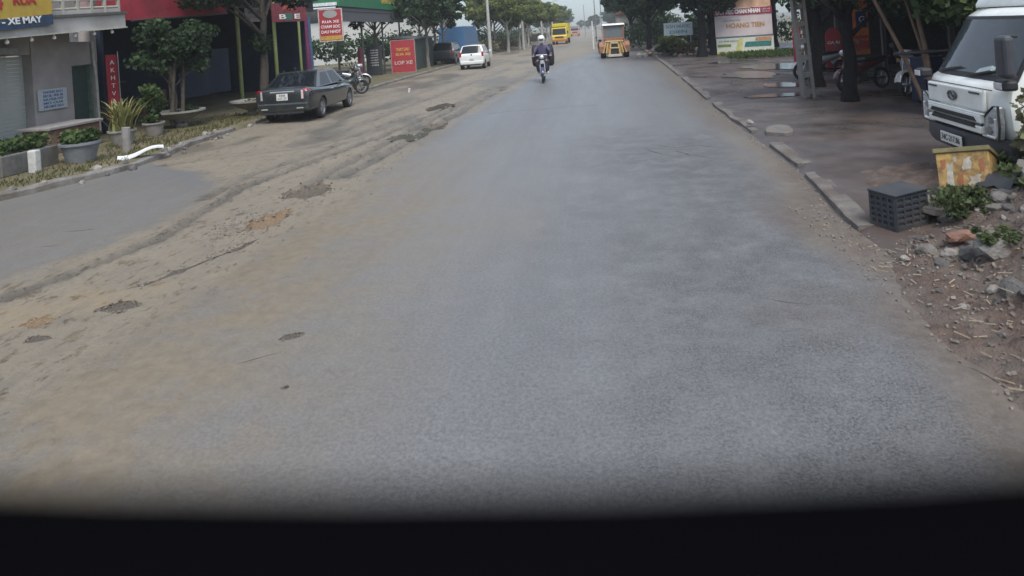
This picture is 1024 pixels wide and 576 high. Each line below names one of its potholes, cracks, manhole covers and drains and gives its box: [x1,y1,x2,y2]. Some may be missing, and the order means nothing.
pothole [23,334,52,344]
pothole [93,299,142,314]
pothole [278,180,335,200]
crack [128,239,258,289]
pothole [278,331,305,341]
